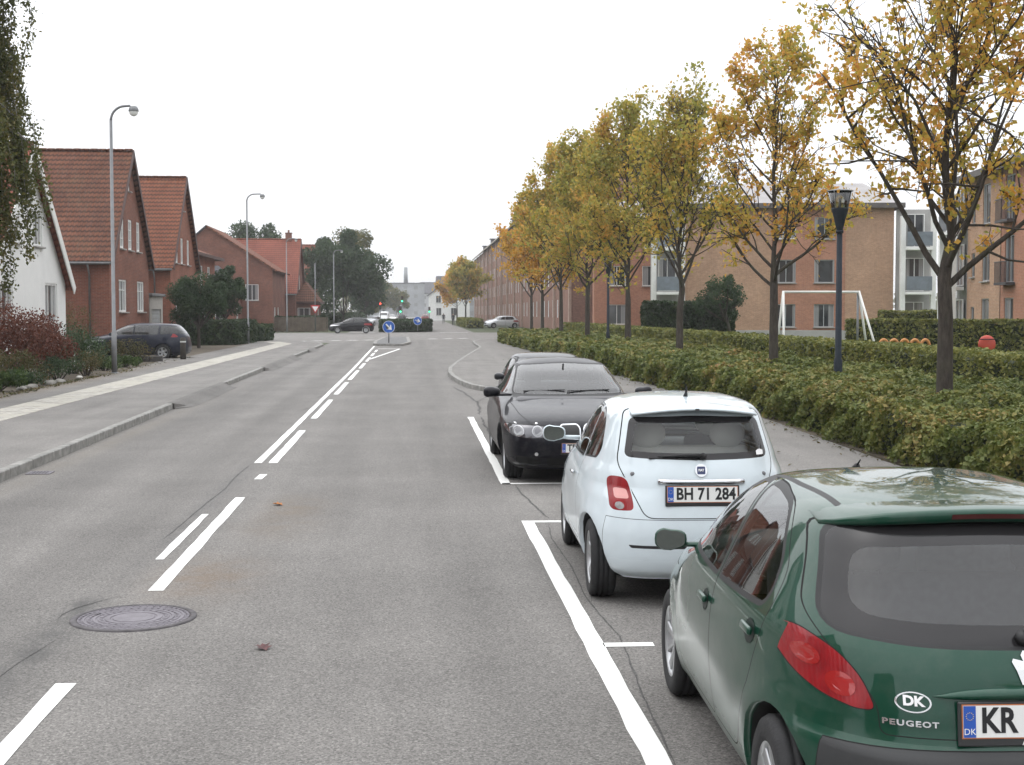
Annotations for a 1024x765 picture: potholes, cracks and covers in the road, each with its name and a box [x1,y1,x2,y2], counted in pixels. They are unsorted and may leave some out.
manhole cover [69,604,197,632]
